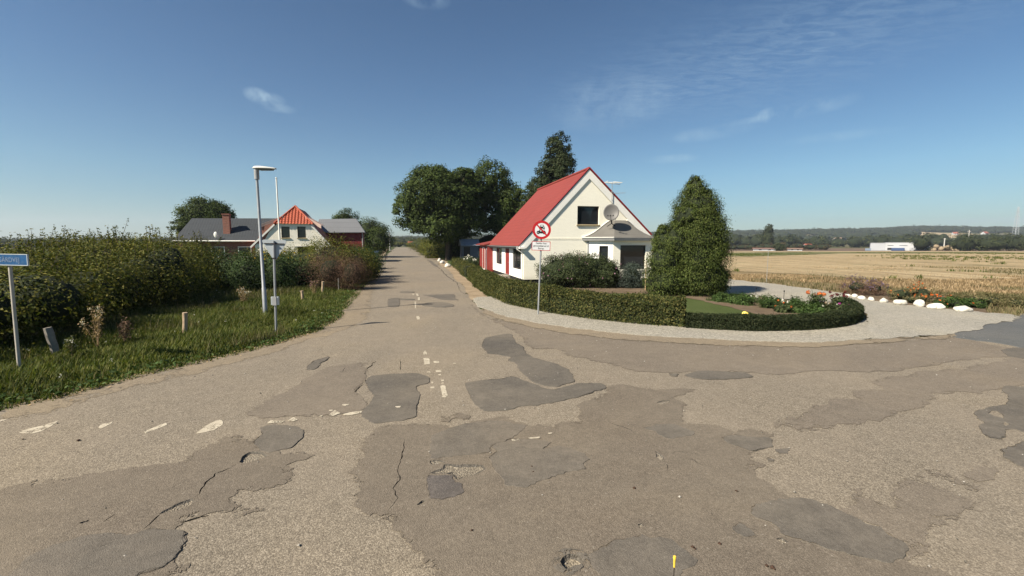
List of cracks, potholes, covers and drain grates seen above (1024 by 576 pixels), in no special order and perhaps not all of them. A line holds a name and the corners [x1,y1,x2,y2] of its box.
pothole [430,464,486,480]
crack [145,466,233,528]
crack [388,439,405,511]
pothole [553,548,590,575]
